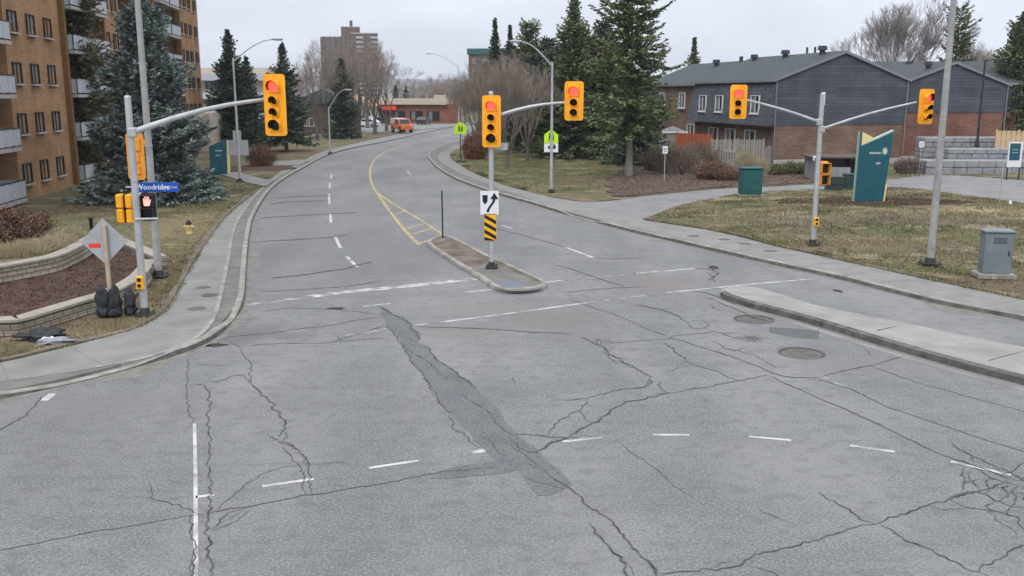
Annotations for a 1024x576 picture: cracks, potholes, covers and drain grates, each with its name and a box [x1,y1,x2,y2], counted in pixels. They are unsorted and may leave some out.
crack [548,441,1024,576]
manhole cover [733,315,775,324]
crack [511,268,818,453]
manhole cover [777,347,826,359]
crack [2,341,493,576]
